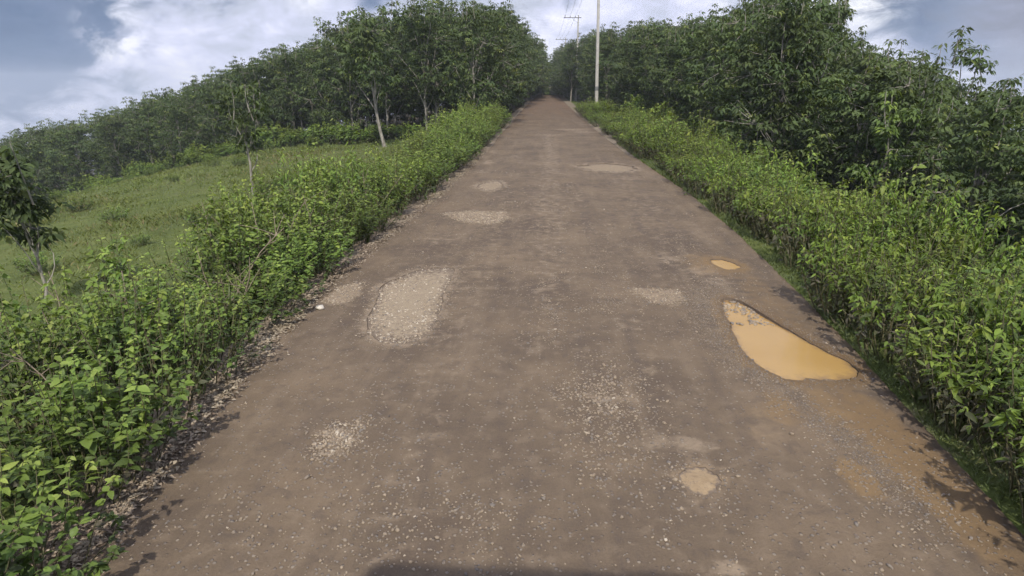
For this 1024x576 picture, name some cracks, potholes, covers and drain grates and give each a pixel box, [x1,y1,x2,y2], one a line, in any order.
pothole [721,297,859,380]
pothole [710,259,741,270]
pothole [367,267,455,344]
pothole [679,467,722,496]
